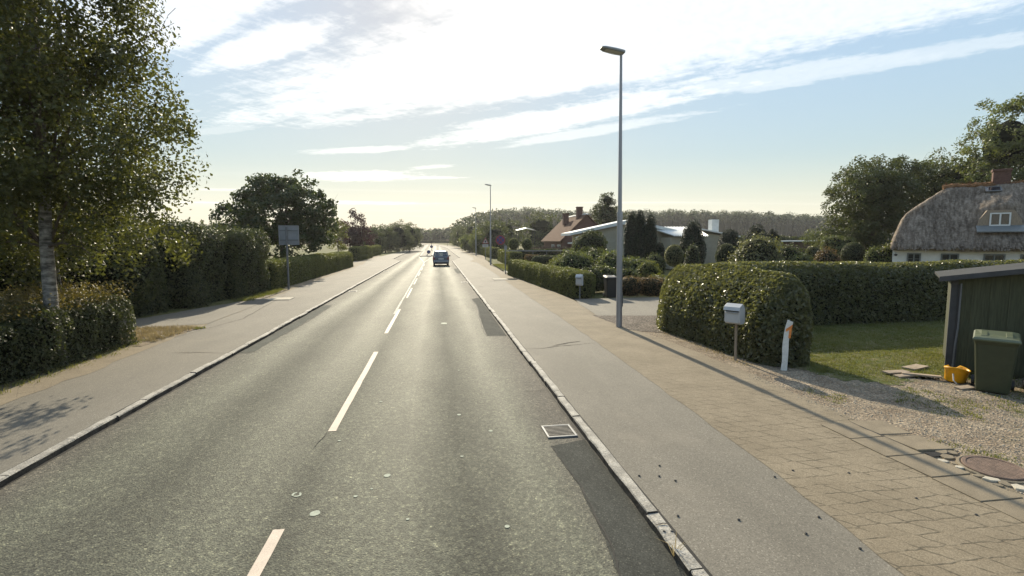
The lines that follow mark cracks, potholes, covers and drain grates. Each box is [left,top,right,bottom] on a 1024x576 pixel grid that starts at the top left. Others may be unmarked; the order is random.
drain grate [541,424,578,439]
manhole cover [955,455,1024,484]
